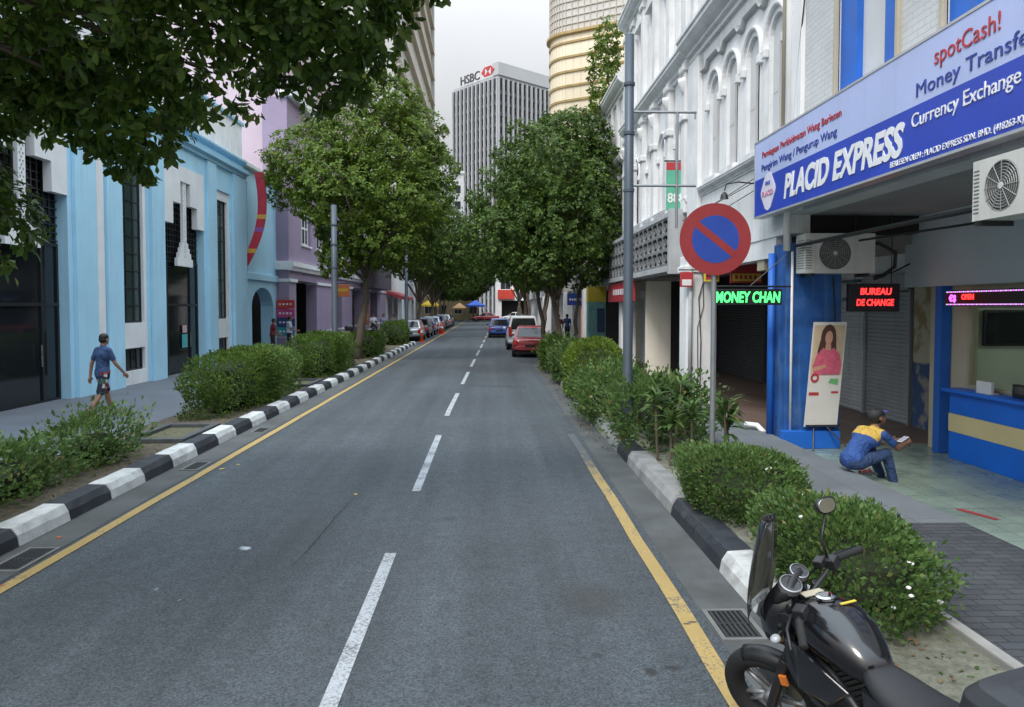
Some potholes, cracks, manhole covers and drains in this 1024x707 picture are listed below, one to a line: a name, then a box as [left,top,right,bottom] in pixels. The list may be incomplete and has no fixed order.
drain grate [179,462,212,471]
drain grate [701,608,770,641]
crack [293,502,350,565]
drain grate [0,547,61,573]
